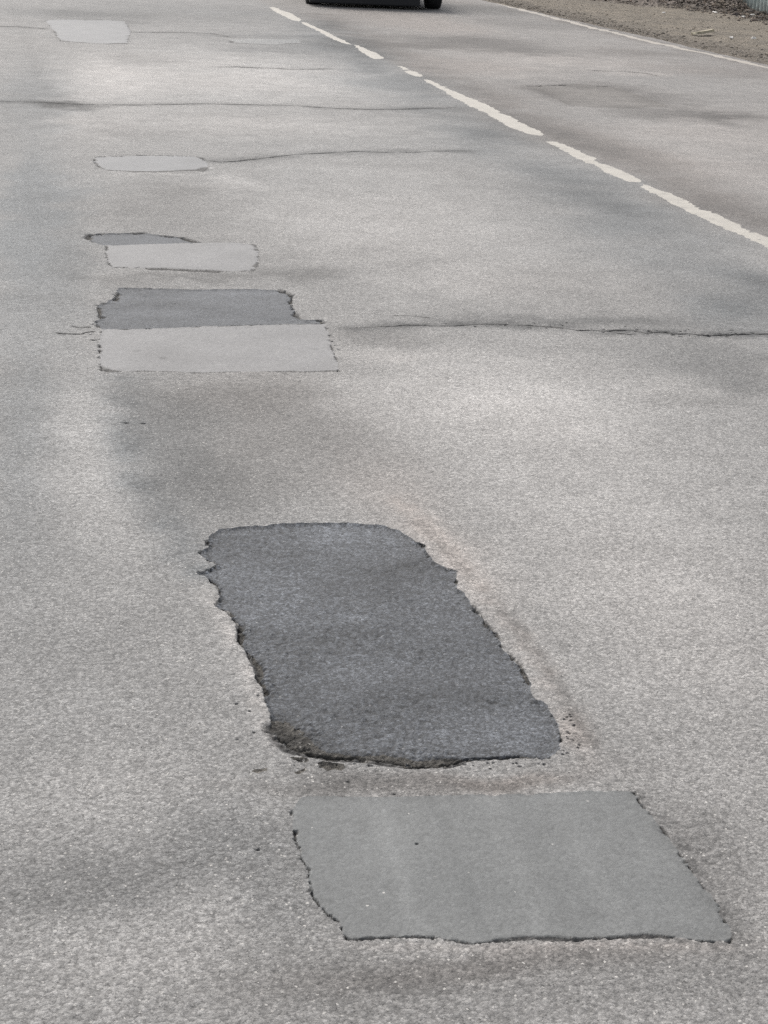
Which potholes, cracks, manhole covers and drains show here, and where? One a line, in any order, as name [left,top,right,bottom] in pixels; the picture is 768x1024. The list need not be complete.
crack [17,101,456,110]
